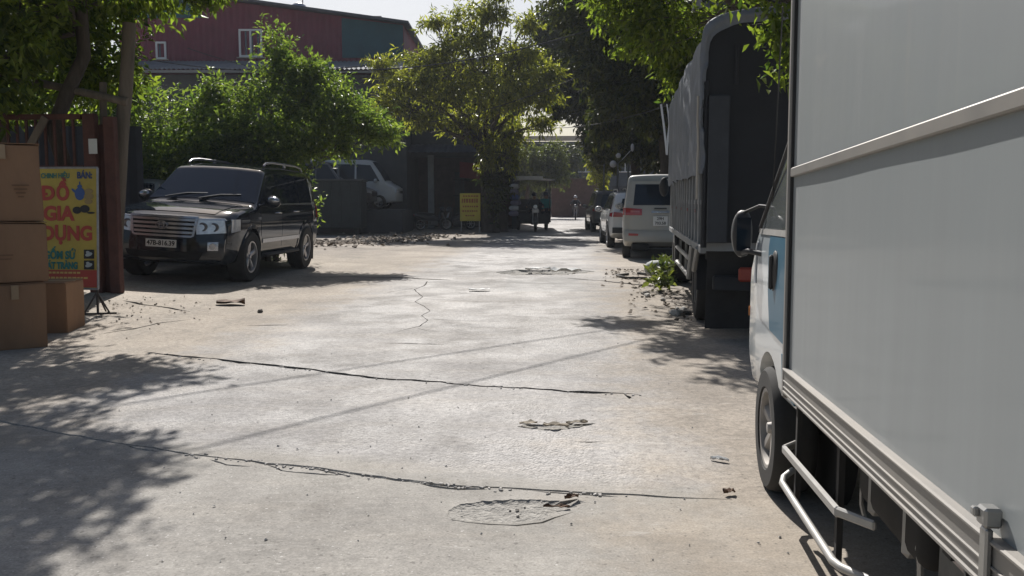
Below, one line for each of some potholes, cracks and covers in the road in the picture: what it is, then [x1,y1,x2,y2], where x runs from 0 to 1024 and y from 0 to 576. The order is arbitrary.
pothole [517,423,595,432]
pothole [446,499,585,526]
crack [0,421,732,500]
crack [148,277,641,399]
